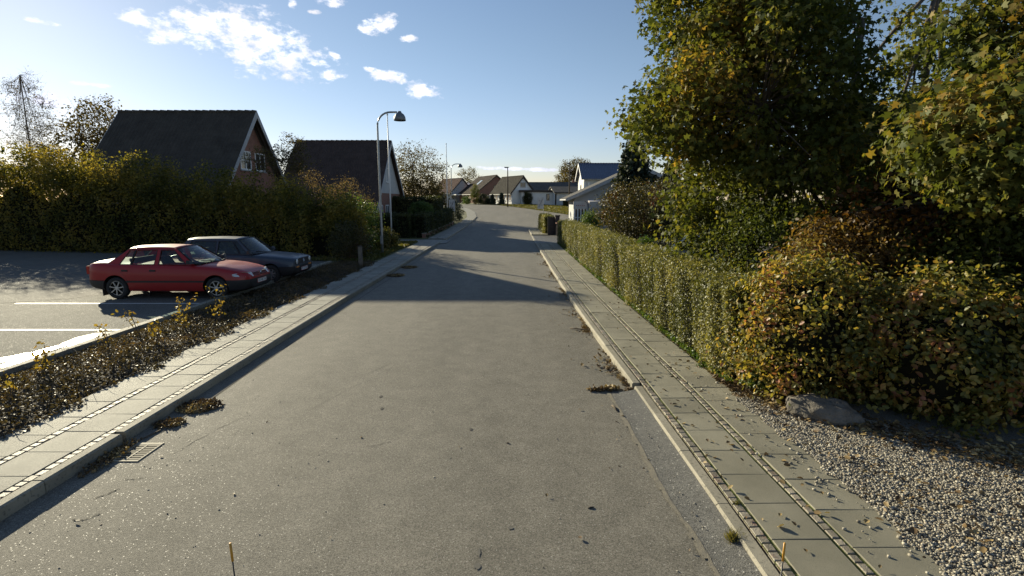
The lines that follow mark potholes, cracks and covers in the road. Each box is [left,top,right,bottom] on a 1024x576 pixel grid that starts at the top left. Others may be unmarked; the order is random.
drain grate [112,443,164,462]
